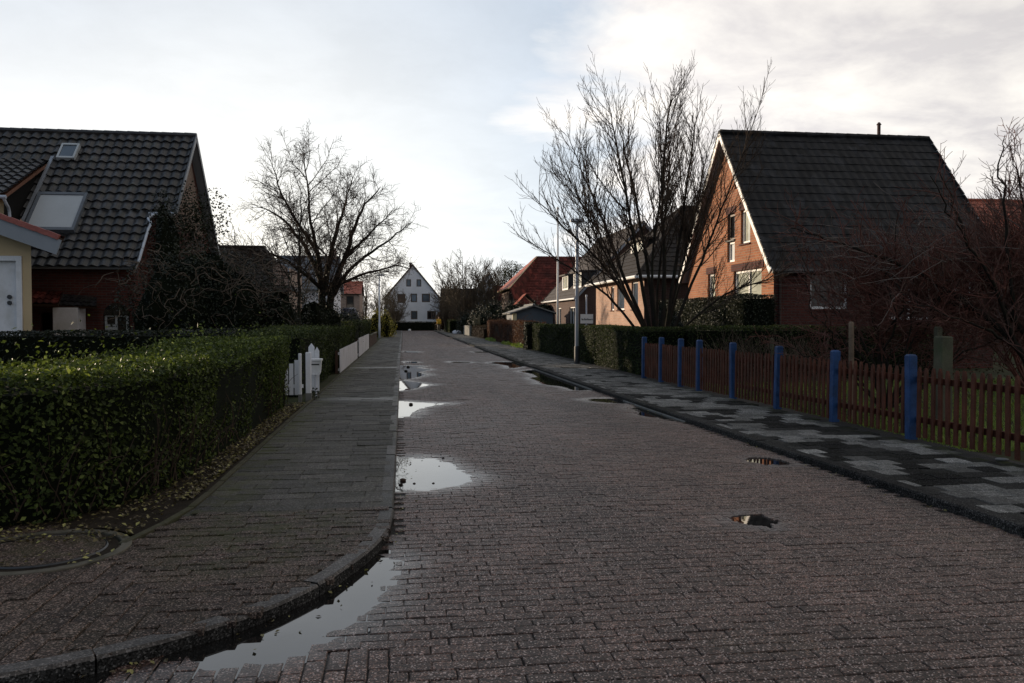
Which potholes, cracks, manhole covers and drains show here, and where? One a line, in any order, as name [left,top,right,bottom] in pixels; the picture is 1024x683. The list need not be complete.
manhole cover [0,529,132,576]
pothole [730,515,779,528]
